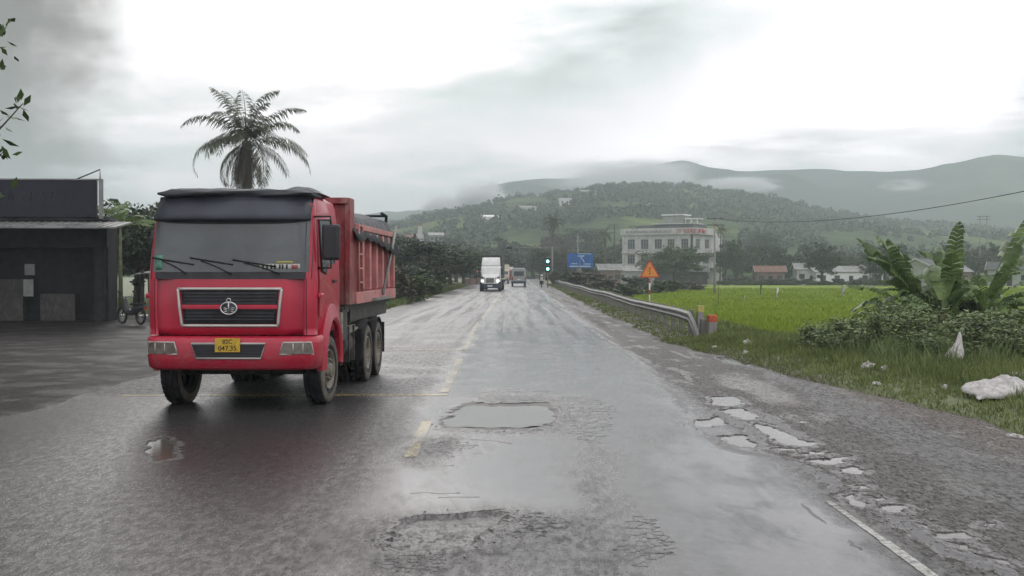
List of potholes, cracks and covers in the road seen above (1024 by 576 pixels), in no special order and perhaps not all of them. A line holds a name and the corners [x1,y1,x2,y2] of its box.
pothole [703,395,753,407]
pothole [926,528,994,542]
pothole [798,455,859,467]
pothole [747,421,826,448]
pothole [372,507,523,555]
pothole [846,483,878,491]
pothole [703,433,769,449]
crack [467,388,616,443]
pothole [135,436,185,463]
pothole [687,414,735,429]
